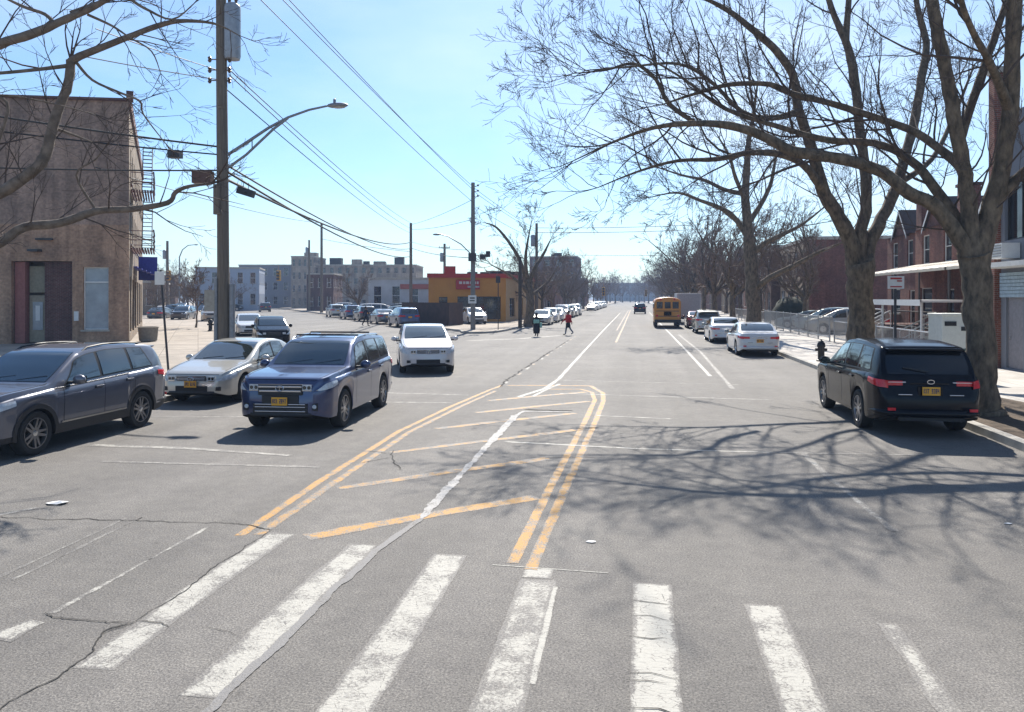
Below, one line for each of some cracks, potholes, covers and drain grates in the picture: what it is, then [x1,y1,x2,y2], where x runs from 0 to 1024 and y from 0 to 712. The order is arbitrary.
crack [0,533,266,709]
crack [0,516,271,530]
crack [627,600,675,712]
